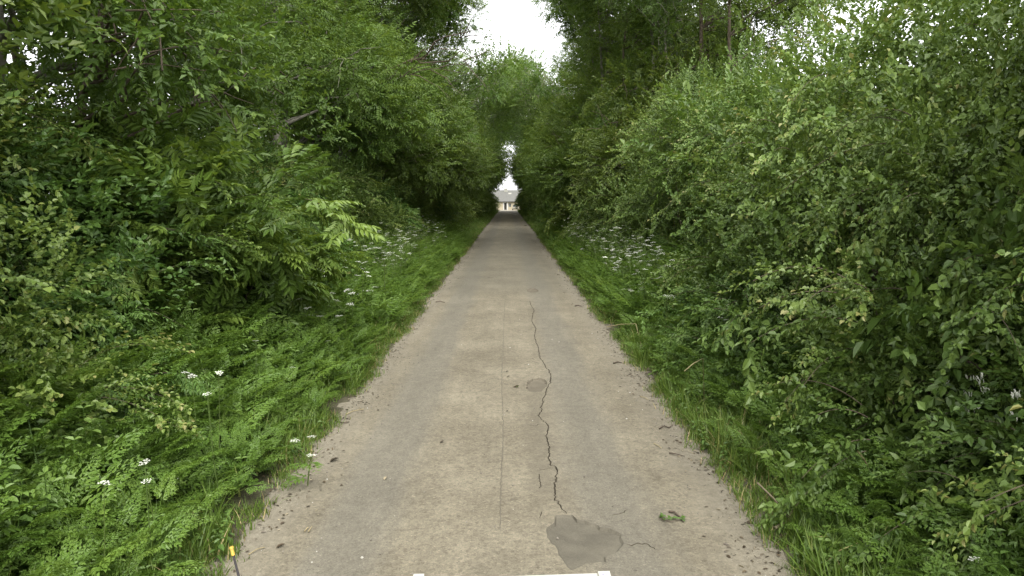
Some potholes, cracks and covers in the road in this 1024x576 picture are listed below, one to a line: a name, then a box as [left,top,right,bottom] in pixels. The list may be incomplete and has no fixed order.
crack [530,302,567,518]
